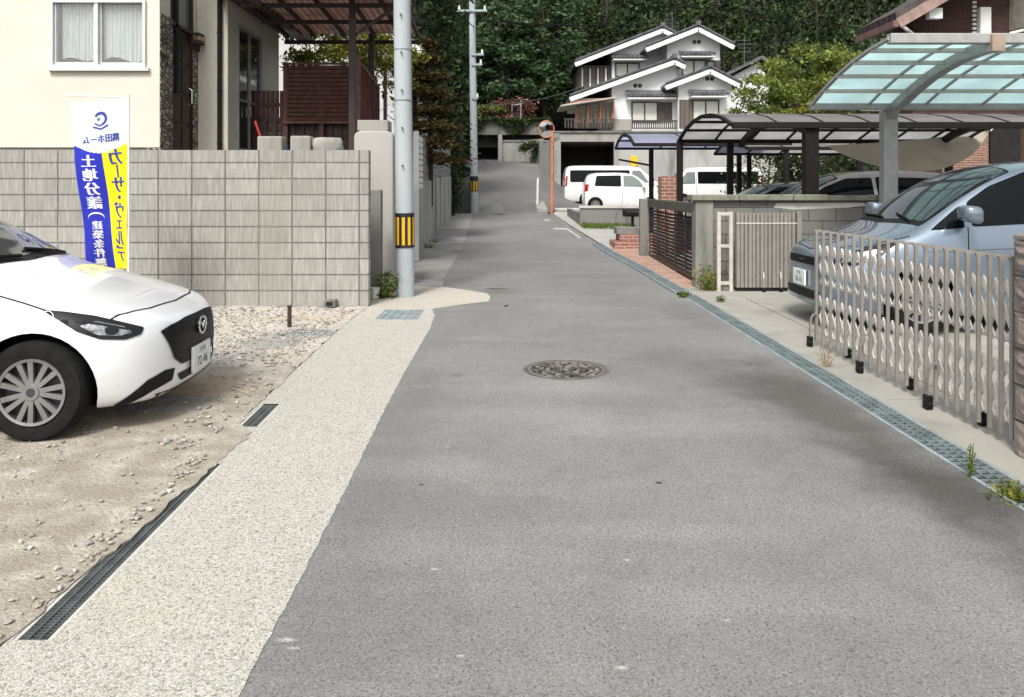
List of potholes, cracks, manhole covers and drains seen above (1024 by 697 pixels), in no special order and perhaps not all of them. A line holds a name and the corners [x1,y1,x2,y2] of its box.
drain grate [375,310,424,320]
drain grate [685,295,1024,511]
drain grate [240,404,280,427]
manhole cover [523,360,610,380]
drain grate [13,464,222,640]
